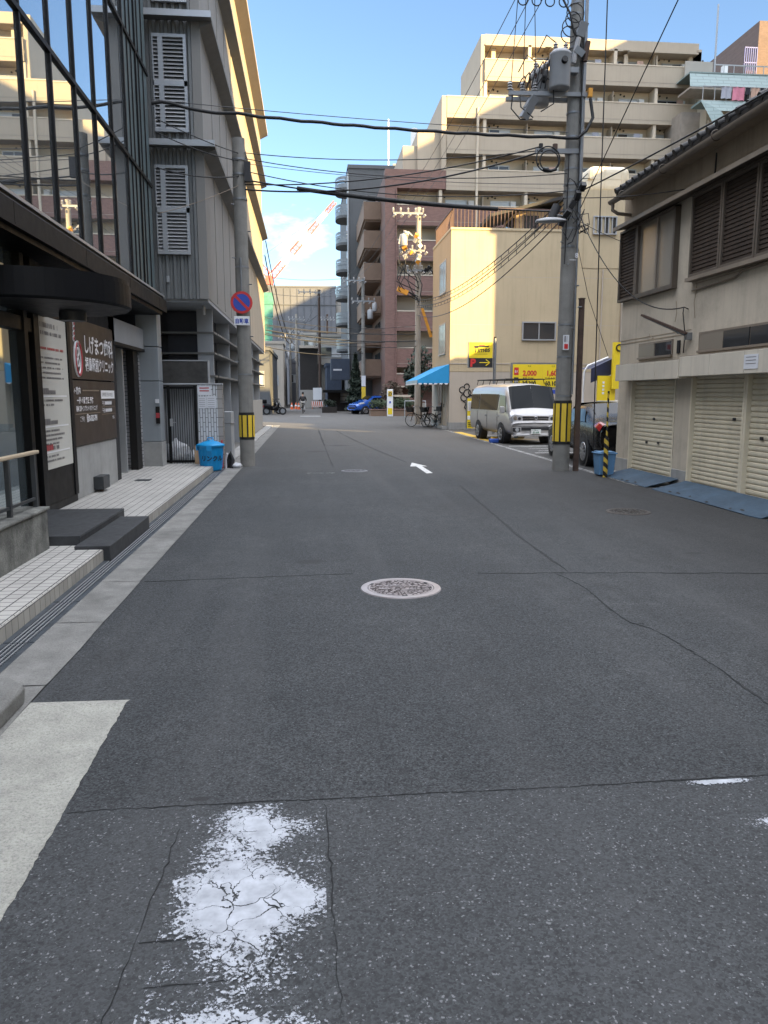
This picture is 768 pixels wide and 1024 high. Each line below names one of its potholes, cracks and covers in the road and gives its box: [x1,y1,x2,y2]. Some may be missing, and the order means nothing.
drain grate [3,602,78,644]
drain grate [0,643,33,673]
drain grate [143,519,170,534]
crack [460,485,768,704]
drain grate [89,550,136,573]
manhole cover [361,578,441,599]
drain grate [180,490,202,499]
drain grate [123,533,154,551]
drain grate [155,508,182,520]
drain grate [169,498,193,508]
drain grate [54,572,111,603]
crack [67,775,763,1013]
